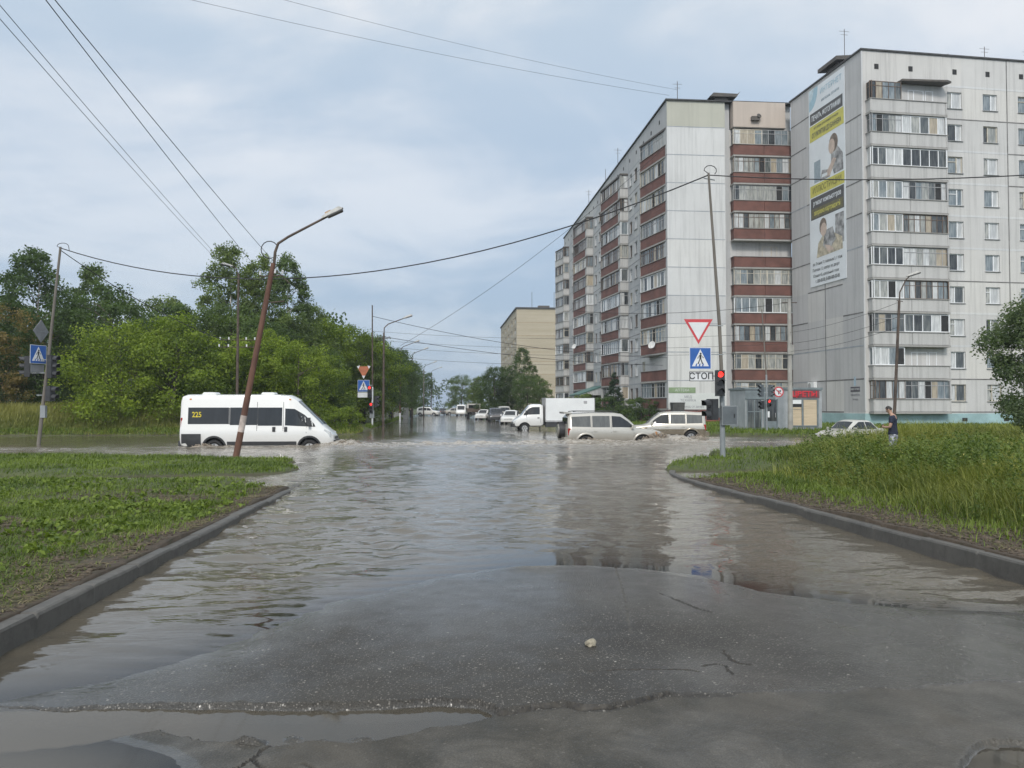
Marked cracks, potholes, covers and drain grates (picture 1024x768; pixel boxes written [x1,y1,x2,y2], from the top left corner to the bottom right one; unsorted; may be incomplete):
crack [659,593,712,613]
pothole [17,697,496,755]
crack [588,650,753,675]
